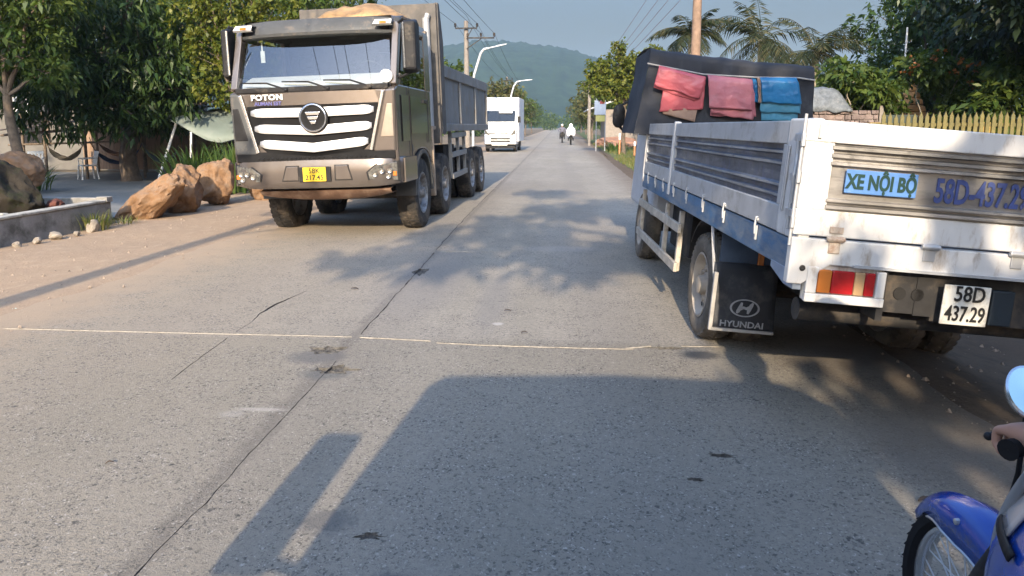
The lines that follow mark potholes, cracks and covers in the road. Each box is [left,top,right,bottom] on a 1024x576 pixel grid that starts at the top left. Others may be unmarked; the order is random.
pothole [308,346,349,354]
pothole [312,364,362,374]
crack [172,293,301,379]
